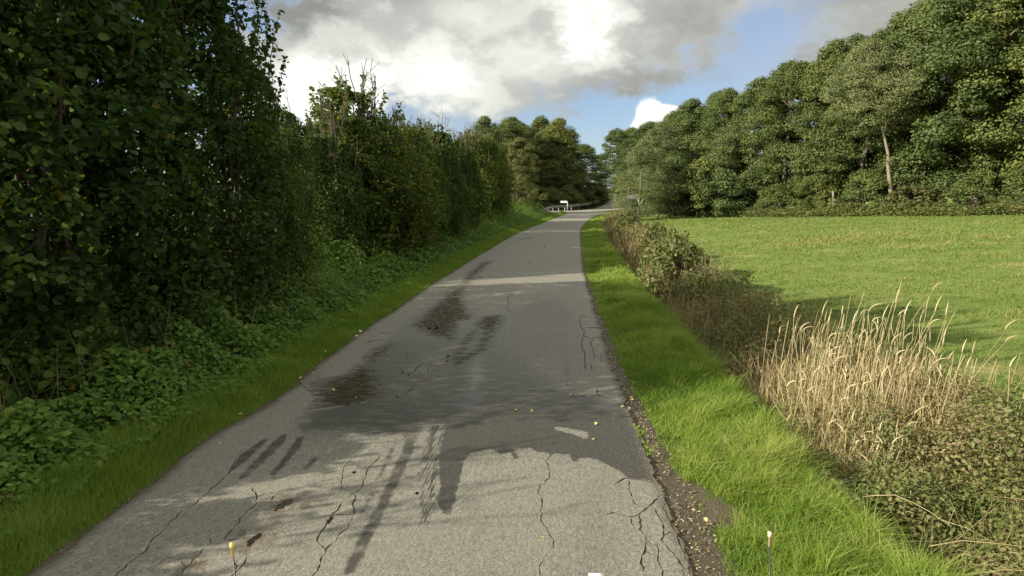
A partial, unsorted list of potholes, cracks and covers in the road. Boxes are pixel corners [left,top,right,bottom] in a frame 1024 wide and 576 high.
crack [579,316,604,372]
crack [538,454,586,575]
crack [115,462,279,576]
crack [312,454,381,576]
pothole [273,498,293,512]
crack [524,389,624,404]
crack [606,478,691,576]
